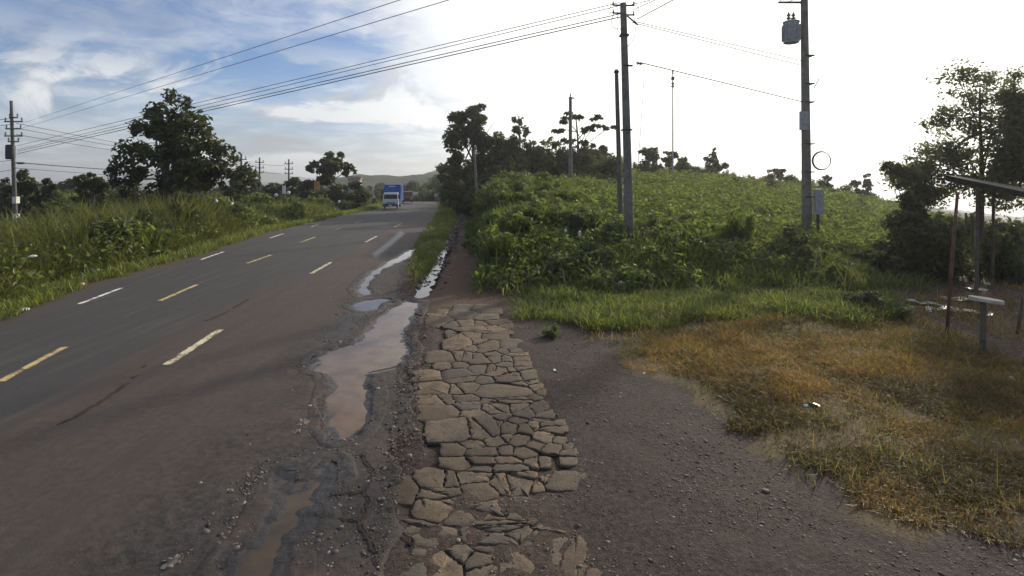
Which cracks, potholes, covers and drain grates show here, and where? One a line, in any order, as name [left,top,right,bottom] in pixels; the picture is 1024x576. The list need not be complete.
pothole [298,297,430,448]
crack [402,309,579,576]
pothole [346,248,417,298]
